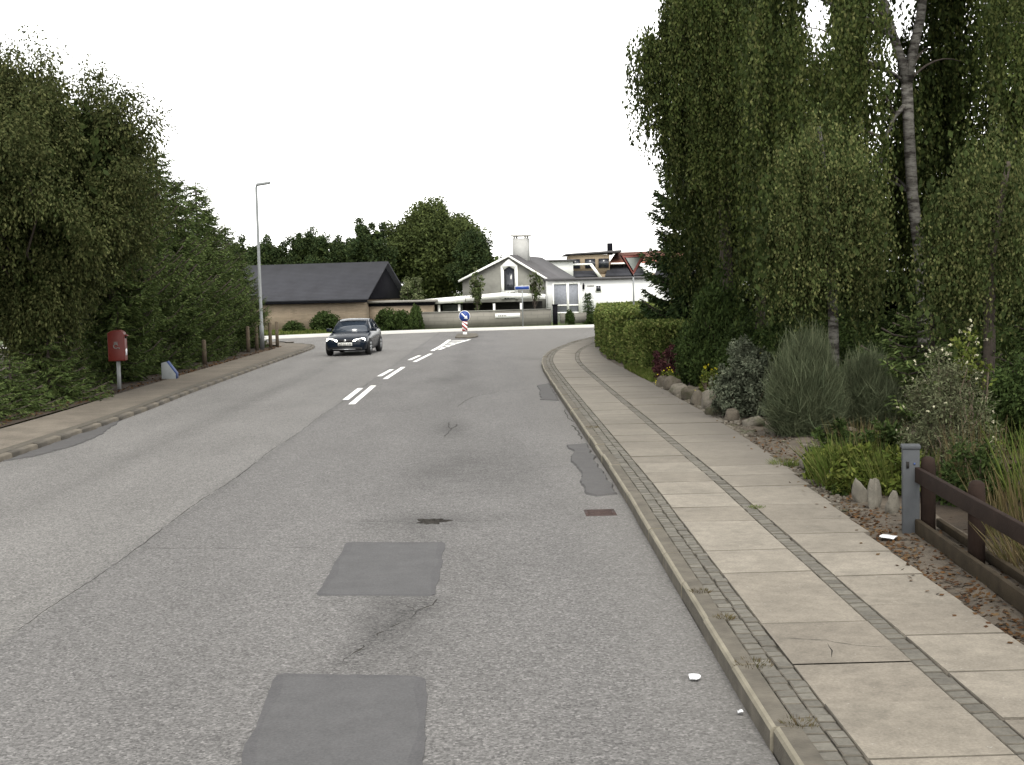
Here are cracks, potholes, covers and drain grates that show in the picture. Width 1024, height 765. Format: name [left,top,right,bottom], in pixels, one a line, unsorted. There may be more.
crack [340,599,437,665]
crack [791,638,882,657]
